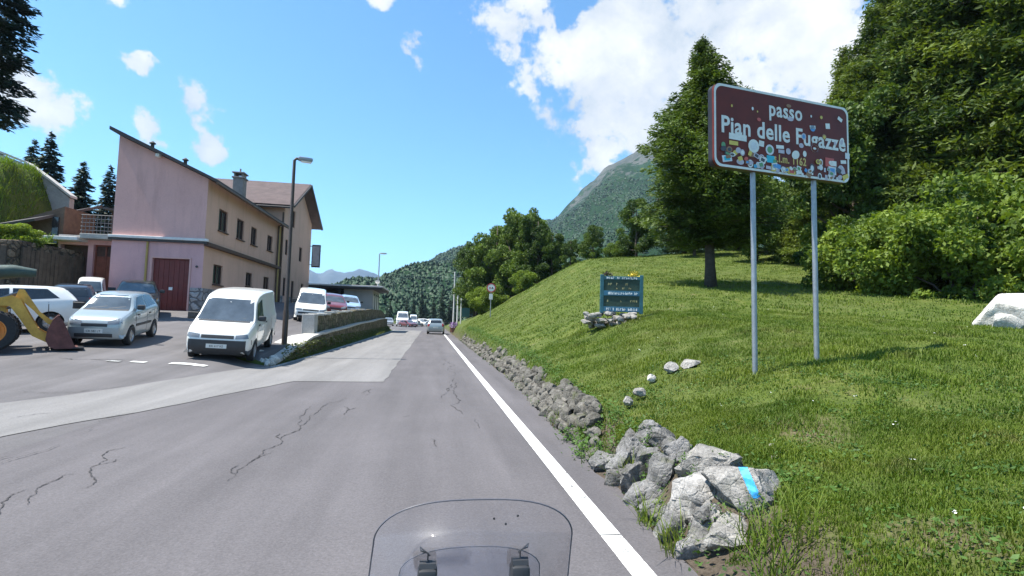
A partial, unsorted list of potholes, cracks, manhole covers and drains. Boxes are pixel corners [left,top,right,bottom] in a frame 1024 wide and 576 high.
crack [0,445,131,513]
crack [227,399,343,481]
